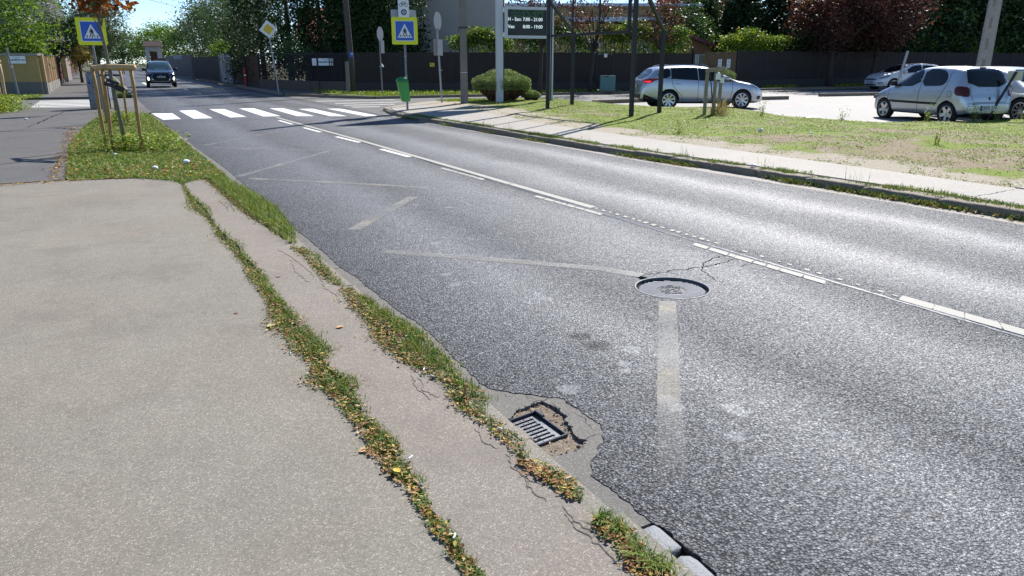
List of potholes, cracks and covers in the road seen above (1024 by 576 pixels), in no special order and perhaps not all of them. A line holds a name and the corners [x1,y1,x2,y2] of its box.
drain grate [509,409,568,447]
manhole cover [634,276,711,299]
crack [222,202,615,562]
